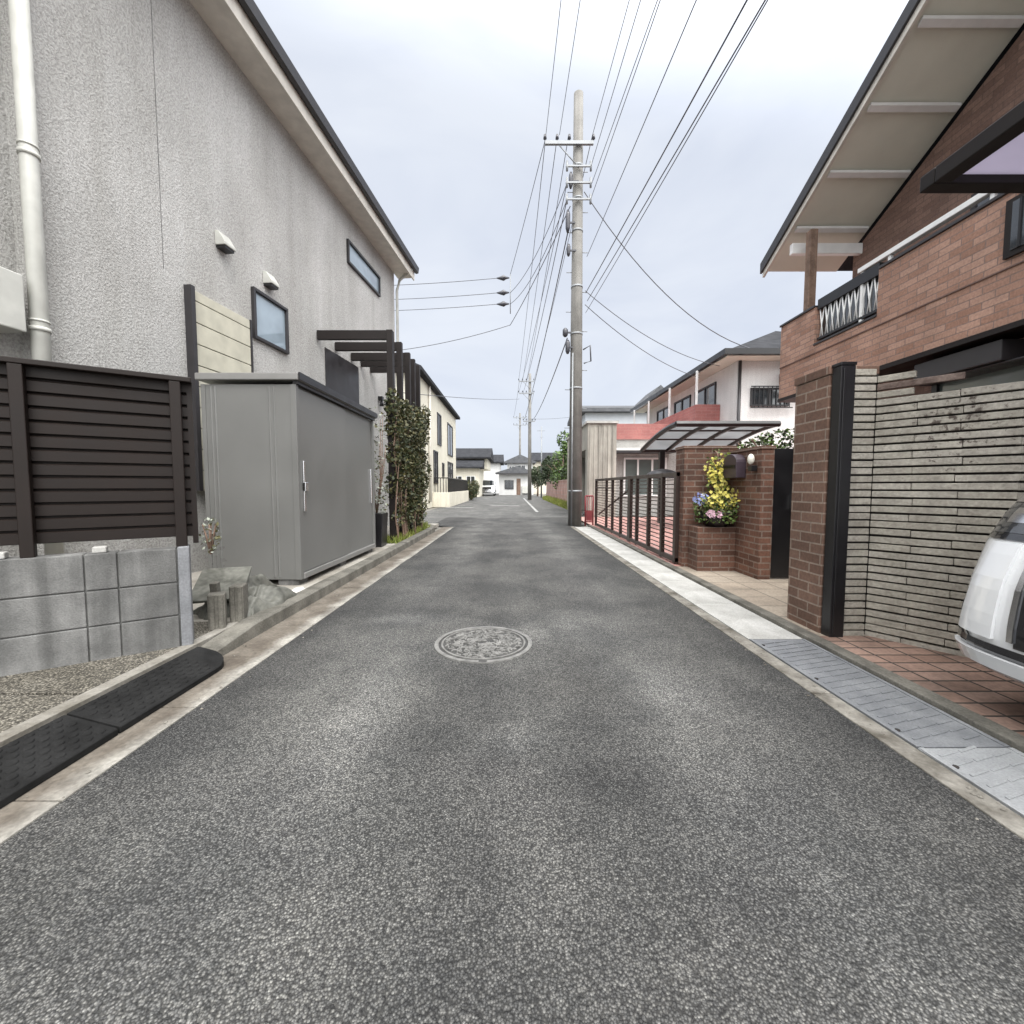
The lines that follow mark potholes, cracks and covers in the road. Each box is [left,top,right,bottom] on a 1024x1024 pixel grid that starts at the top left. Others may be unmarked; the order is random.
manhole cover [434,626,532,664]
